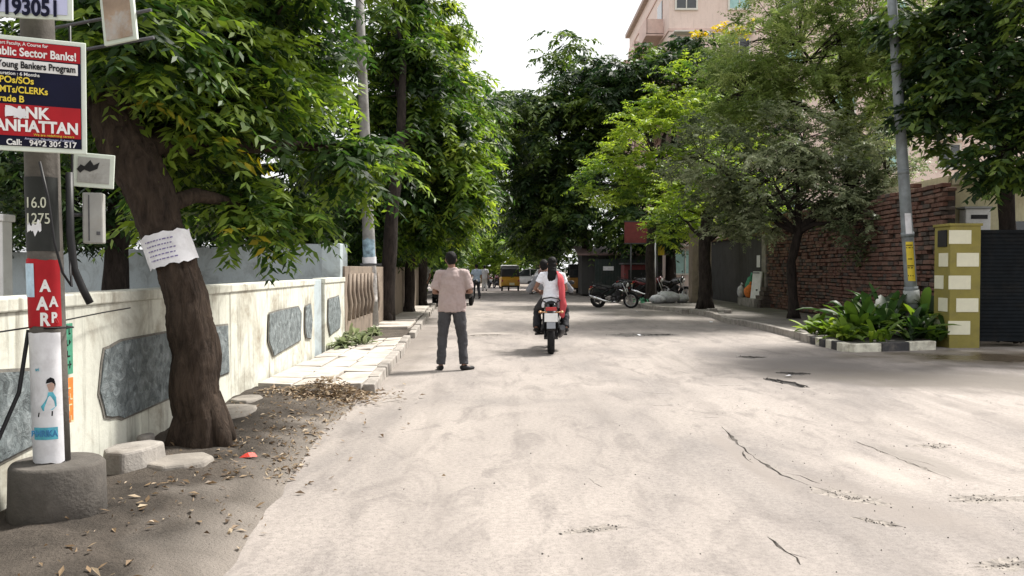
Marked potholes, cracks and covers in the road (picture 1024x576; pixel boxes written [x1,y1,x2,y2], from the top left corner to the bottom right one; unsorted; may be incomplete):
crack [768,537,805,565]
crack [857,442,952,480]
crack [703,417,820,485]
